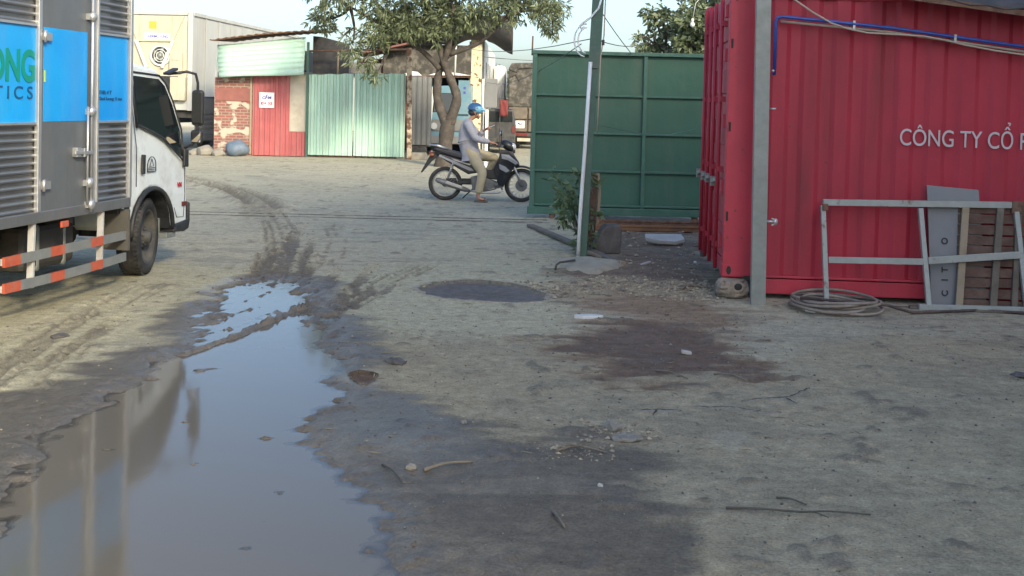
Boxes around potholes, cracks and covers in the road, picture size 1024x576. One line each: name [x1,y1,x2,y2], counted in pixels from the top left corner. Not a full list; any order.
crack [632,387,810,415]
pothole [348,370,379,385]
